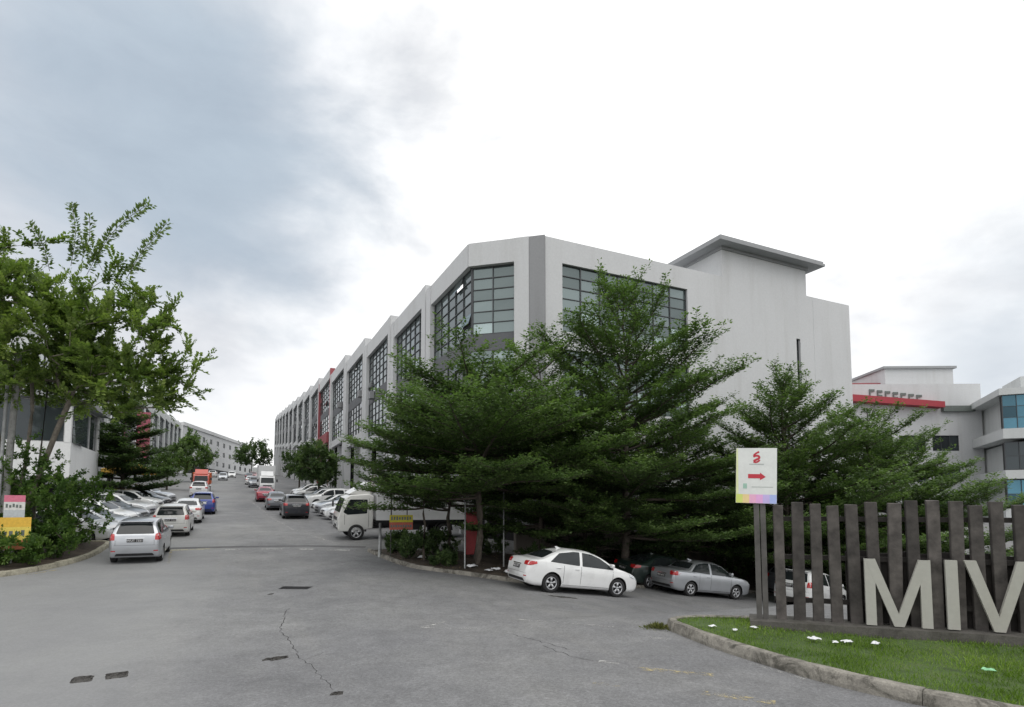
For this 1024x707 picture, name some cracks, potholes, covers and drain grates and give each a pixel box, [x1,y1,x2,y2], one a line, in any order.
crack [513,634,595,661]
pothole [105,671,129,680]
pothole [69,675,94,683]
crack [279,609,332,689]
